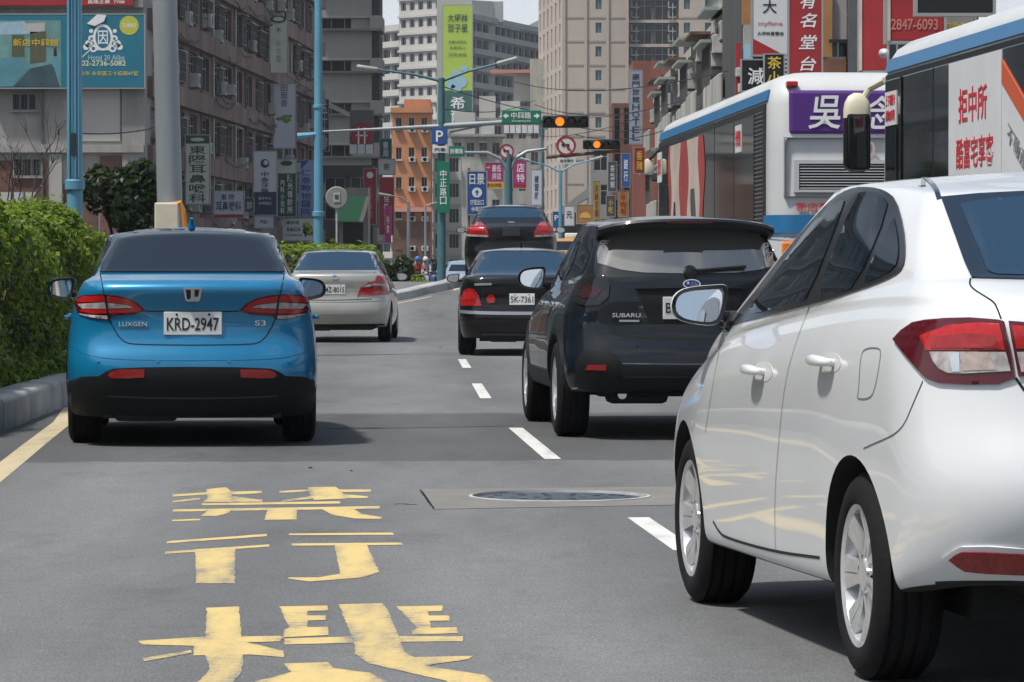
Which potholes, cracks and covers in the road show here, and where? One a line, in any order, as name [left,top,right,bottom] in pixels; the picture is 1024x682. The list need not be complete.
manhole cover [422,486,676,509]
